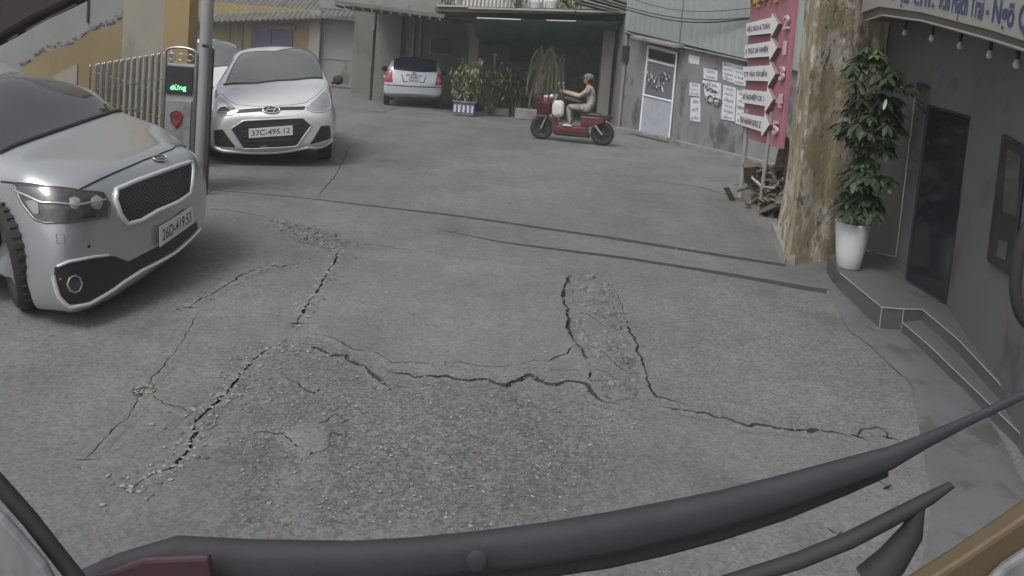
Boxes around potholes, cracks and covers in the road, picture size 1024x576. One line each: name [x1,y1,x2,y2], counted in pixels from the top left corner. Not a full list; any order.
crack [73,262,900,494]
